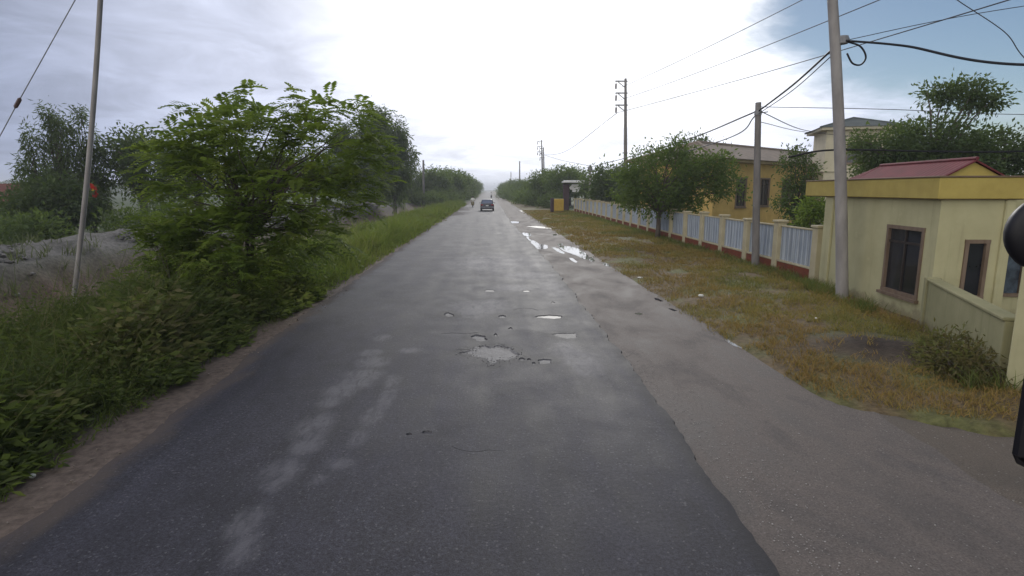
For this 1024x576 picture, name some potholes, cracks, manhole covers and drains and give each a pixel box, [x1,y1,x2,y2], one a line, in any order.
pothole [456,345,520,365]
